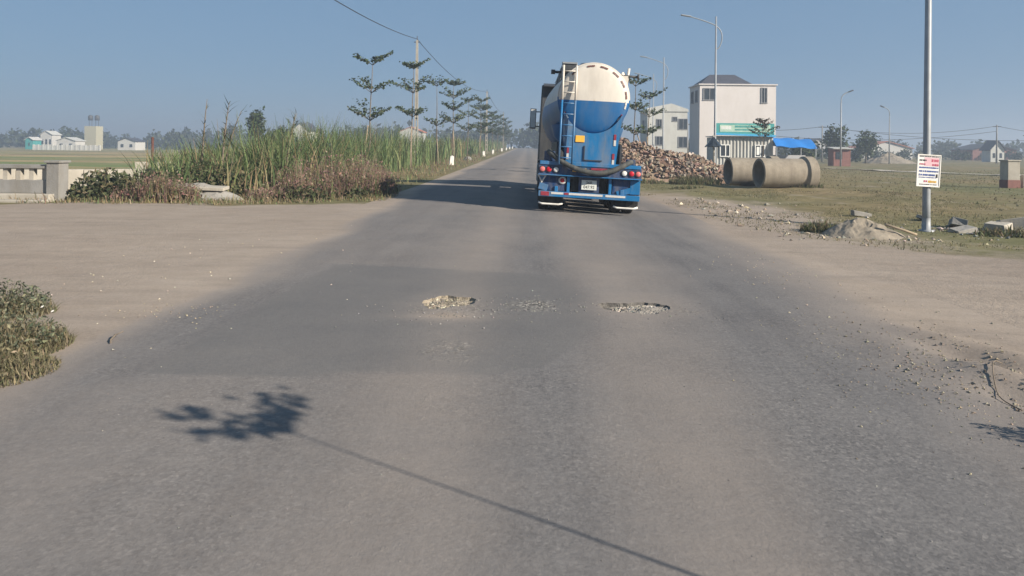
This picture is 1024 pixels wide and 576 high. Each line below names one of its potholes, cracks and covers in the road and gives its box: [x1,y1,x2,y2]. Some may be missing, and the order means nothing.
pothole [598,302,670,314]
pothole [422,295,476,309]
